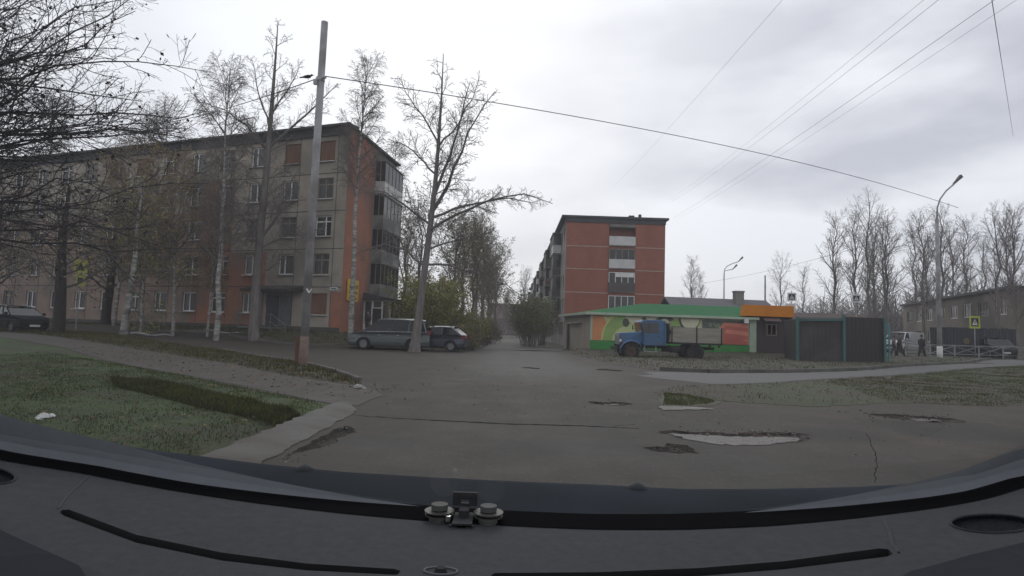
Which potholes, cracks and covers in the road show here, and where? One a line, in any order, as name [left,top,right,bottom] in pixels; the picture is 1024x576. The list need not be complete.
pothole [868,413,967,423]
pothole [284,426,356,457]
pothole [642,443,700,454]
pothole [656,430,813,446]
